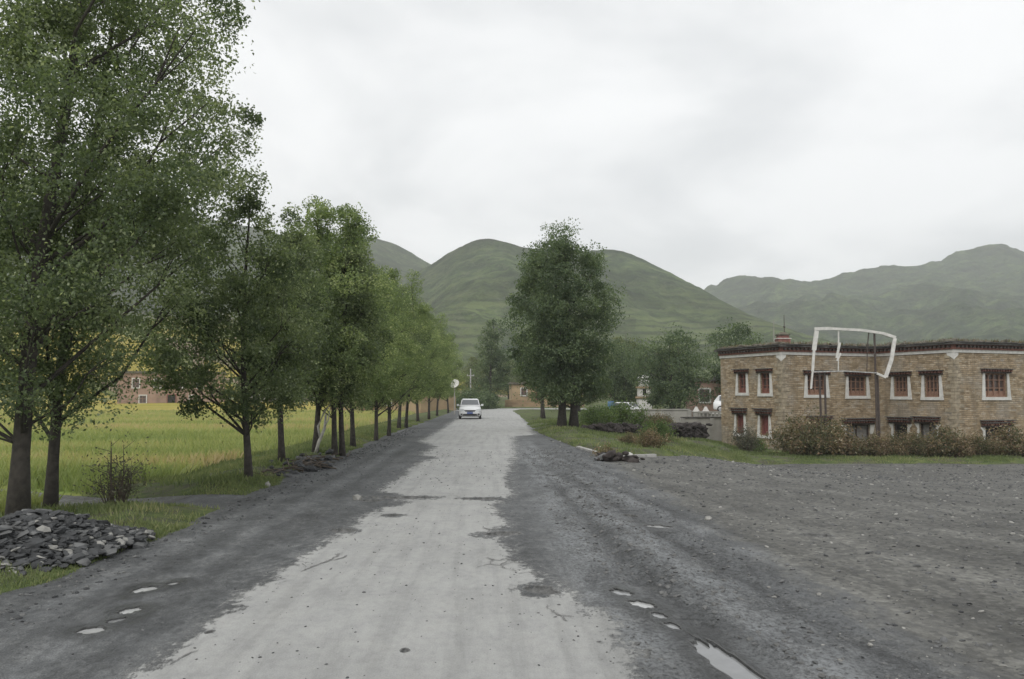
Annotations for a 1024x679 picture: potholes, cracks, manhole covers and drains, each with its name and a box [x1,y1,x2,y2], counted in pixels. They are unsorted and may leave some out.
crack [478,557,544,575]
pothole [105,604,153,617]
pothole [641,610,678,621]
pothole [618,598,666,611]
pothole [600,586,644,598]
pothole [656,620,688,632]
pothole [679,631,778,679]
pothole [95,615,138,625]
pothole [120,584,171,595]
crack [301,552,347,572]
pothole [63,624,118,638]
